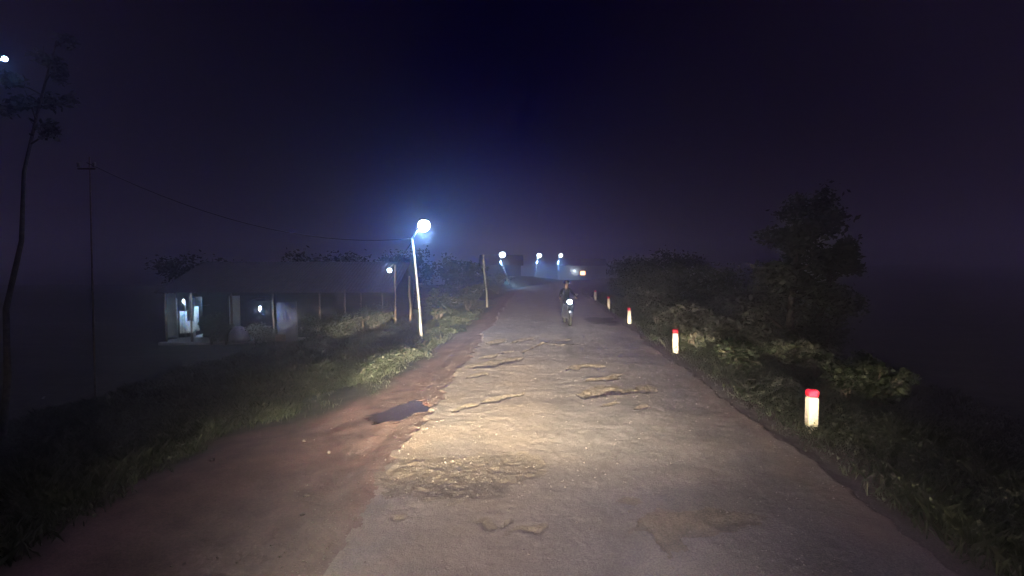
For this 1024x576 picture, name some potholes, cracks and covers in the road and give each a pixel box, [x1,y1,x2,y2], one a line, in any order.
pothole [577,384,658,399]
pothole [373,451,548,506]
pothole [481,392,526,404]
pothole [365,399,436,425]
pothole [465,357,525,369]
pothole [470,517,515,532]
pothole [452,403,480,413]
pothole [567,363,606,371]
pothole [586,374,623,382]
pothole [505,523,549,536]
